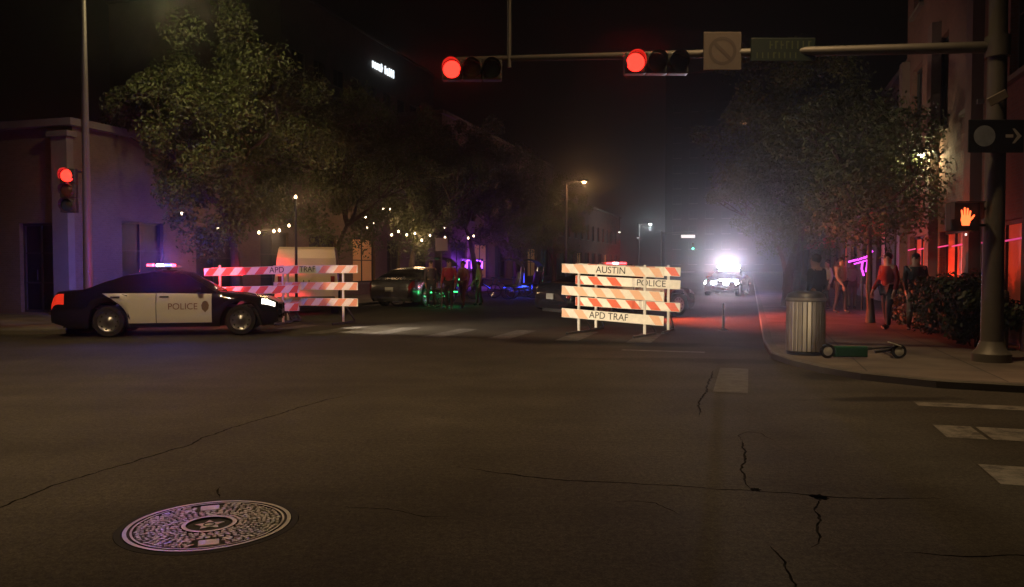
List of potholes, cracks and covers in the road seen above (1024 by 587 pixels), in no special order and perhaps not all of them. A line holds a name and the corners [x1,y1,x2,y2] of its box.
crack [697,371,713,415]
crack [0,393,357,508]
manhole cover [112,499,299,556]
crack [463,432,940,587]
